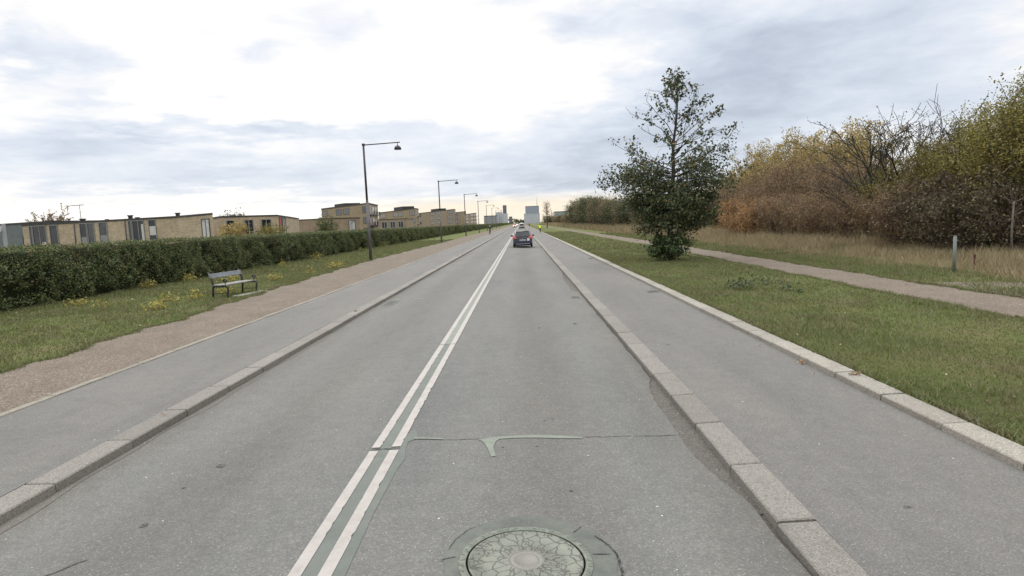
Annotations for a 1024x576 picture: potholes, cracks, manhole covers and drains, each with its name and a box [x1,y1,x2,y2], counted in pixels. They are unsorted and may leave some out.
manhole cover [458,526,594,576]
